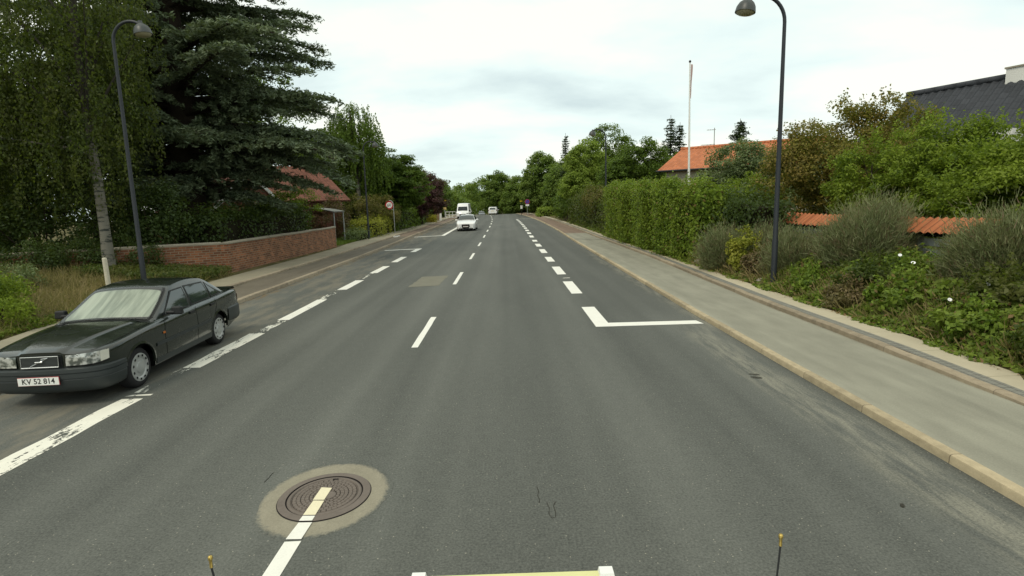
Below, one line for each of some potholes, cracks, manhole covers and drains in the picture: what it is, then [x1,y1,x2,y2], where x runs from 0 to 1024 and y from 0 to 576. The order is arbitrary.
manhole cover [253,464,394,542]
crack [537,487,556,518]
